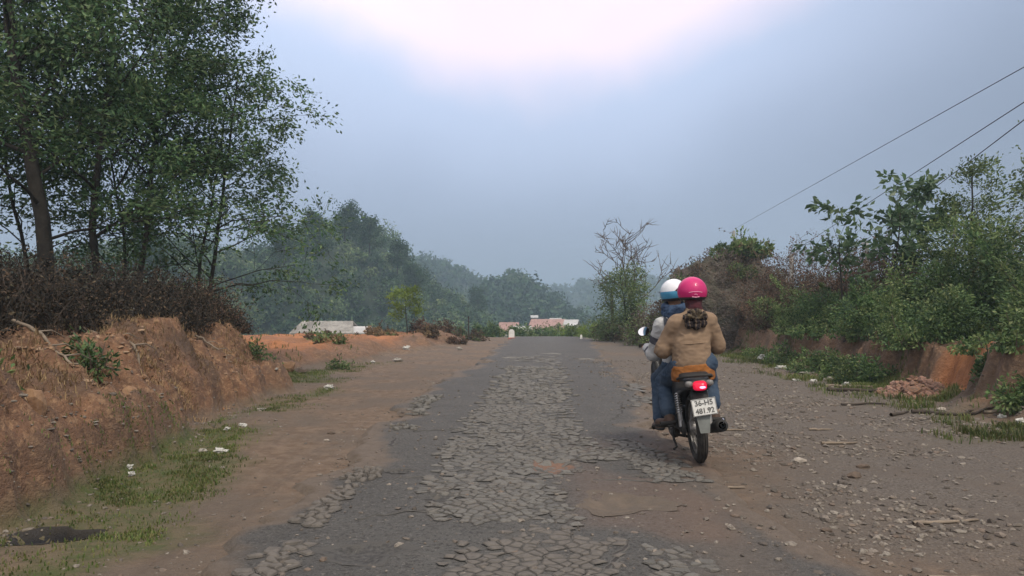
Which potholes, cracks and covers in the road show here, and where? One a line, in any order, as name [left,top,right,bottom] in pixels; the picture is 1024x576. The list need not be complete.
pothole [531,459,583,475]
